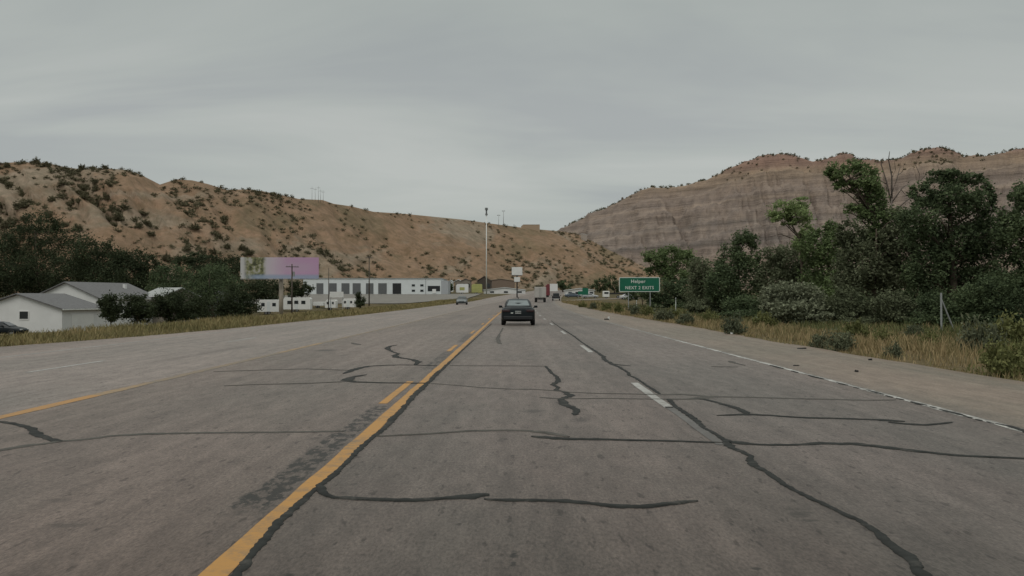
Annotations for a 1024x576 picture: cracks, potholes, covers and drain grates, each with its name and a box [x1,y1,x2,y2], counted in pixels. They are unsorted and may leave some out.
crack [430,383,895,401]
